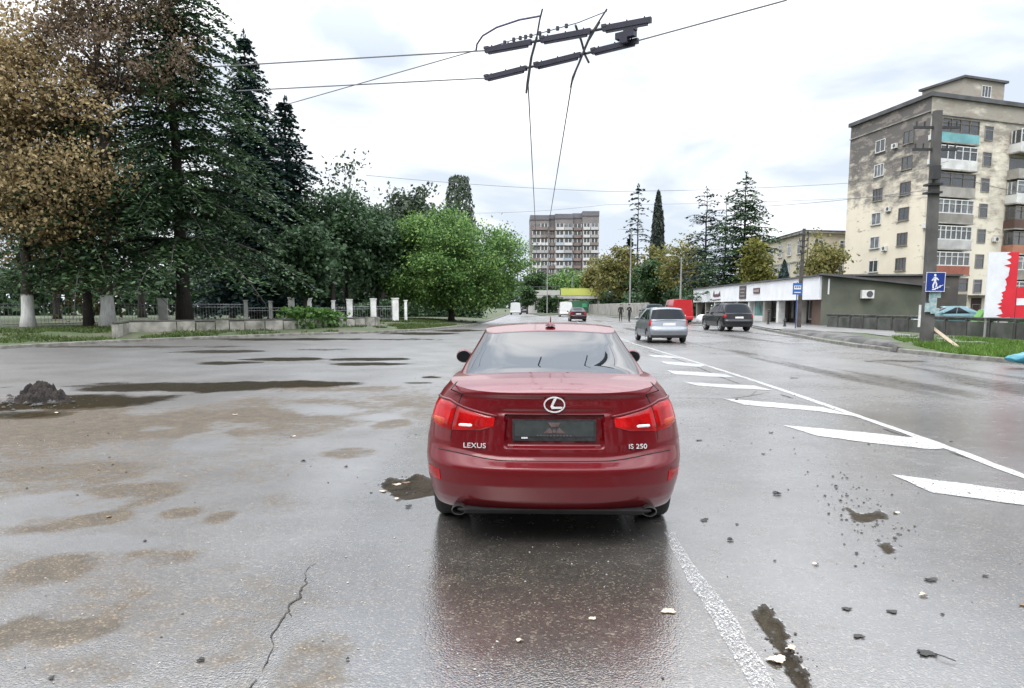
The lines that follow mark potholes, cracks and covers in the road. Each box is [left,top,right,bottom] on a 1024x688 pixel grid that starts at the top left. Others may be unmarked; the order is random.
crack [249,562,317,688]
pothole [354,469,435,508]
